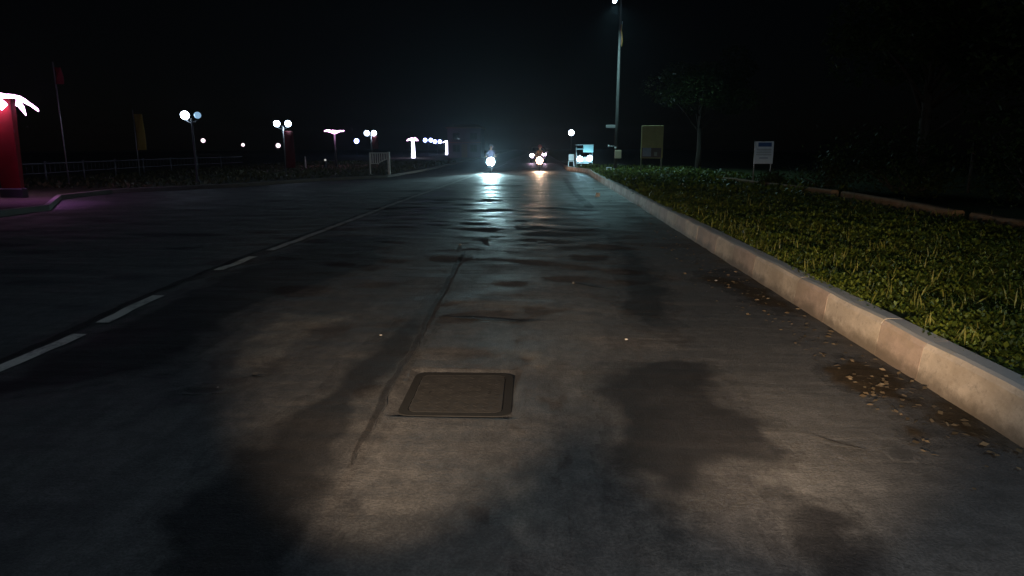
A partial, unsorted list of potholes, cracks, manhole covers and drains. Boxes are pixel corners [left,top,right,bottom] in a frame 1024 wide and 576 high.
manhole cover [398,372,514,417]
crack [812,434,864,449]
